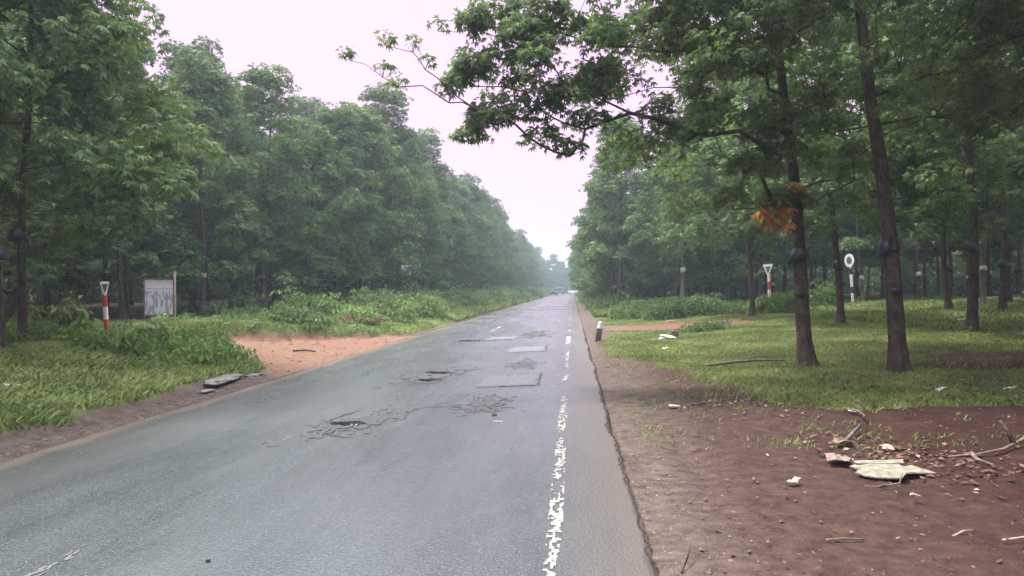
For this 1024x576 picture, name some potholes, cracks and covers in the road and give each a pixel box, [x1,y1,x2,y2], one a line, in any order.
crack [263,393,525,447]
